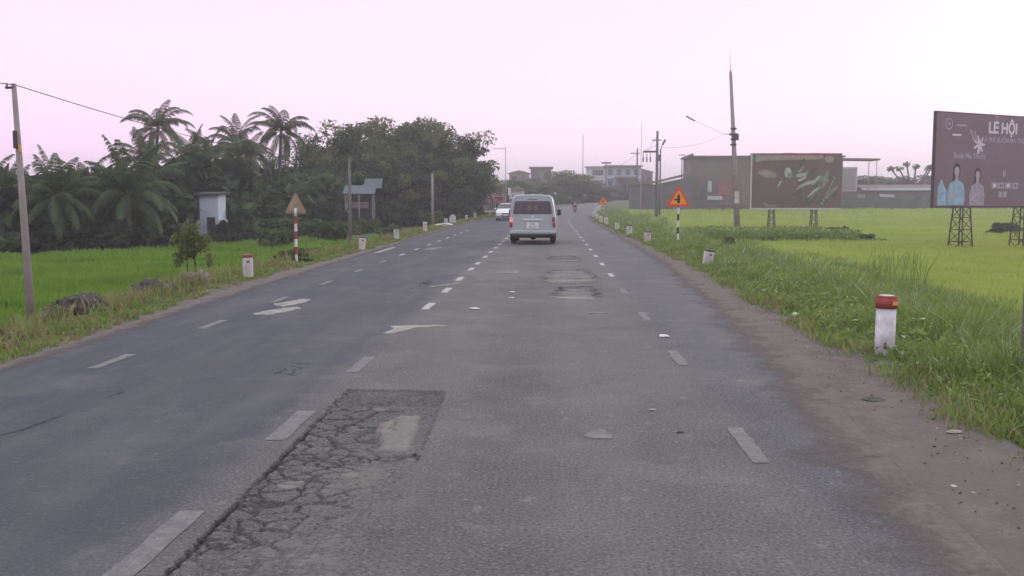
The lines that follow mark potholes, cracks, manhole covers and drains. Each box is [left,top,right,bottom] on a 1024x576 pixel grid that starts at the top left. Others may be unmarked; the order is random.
crack [0,391,140,441]
crack [217,360,327,407]
pothole [538,269,601,284]
pothole [546,286,604,299]
